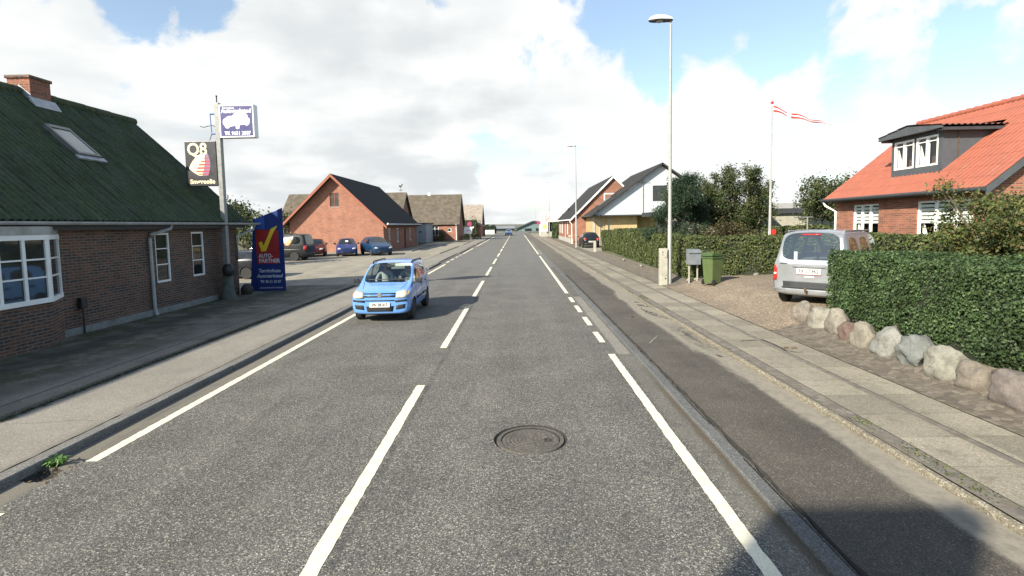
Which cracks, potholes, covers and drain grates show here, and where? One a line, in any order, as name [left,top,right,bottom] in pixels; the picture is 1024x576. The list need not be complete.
manhole cover [494,425,567,455]
